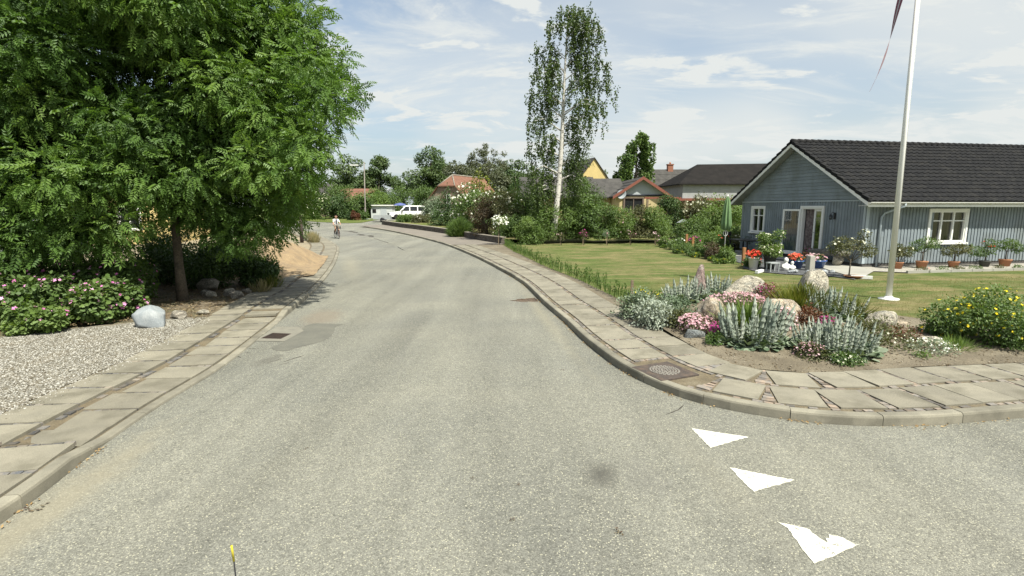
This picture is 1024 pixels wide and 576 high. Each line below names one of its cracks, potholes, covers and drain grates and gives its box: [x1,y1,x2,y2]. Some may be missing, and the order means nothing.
manhole cover [632,362,699,381]
